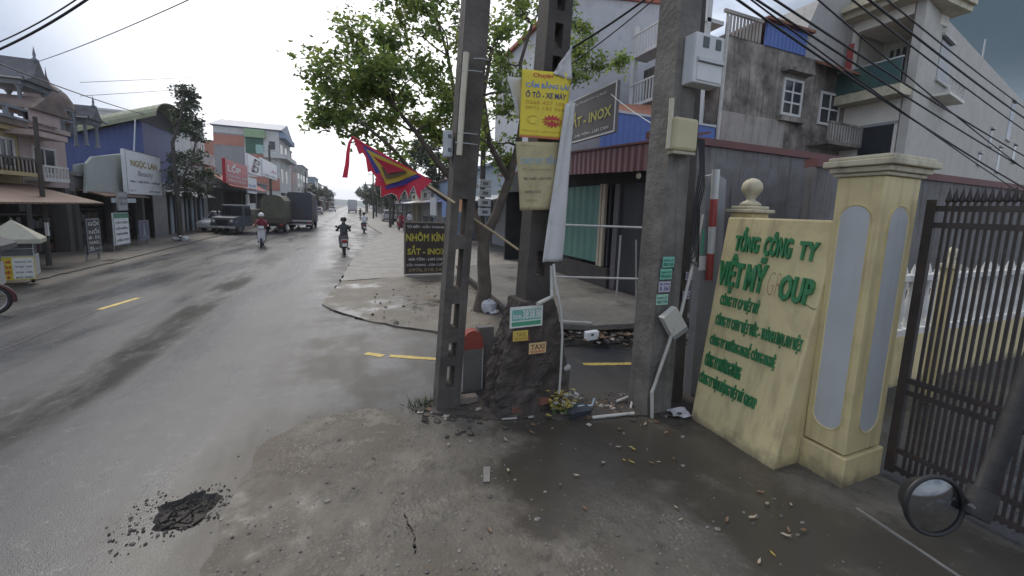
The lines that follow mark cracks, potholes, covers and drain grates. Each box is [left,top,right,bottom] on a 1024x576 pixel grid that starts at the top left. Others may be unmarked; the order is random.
crack [404,516,417,555]
pothole [100,483,230,562]
